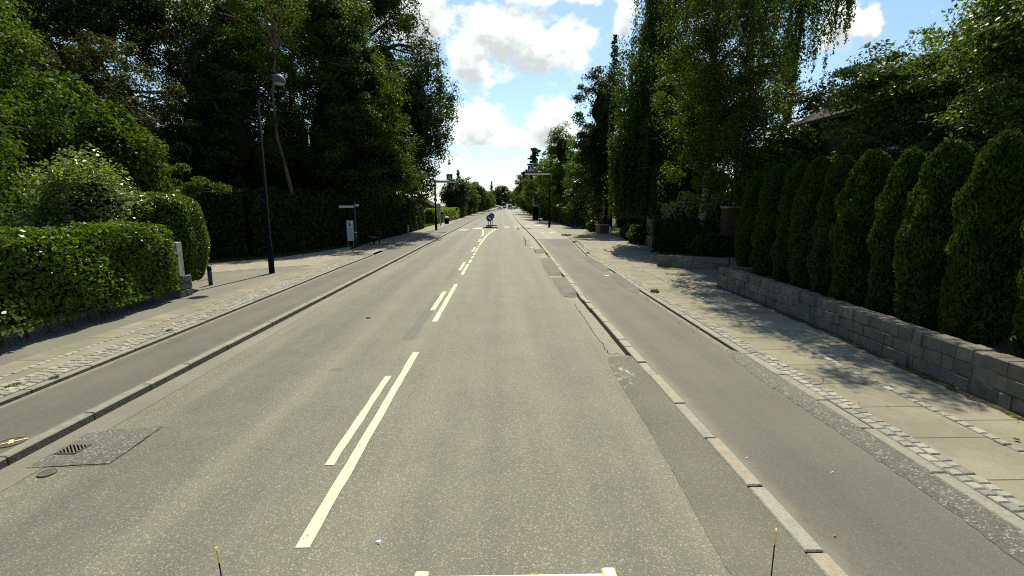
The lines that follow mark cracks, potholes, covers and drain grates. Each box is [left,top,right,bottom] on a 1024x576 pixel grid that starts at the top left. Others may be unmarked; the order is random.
drain grate [54,444,92,454]
manhole cover [37,468,58,477]
